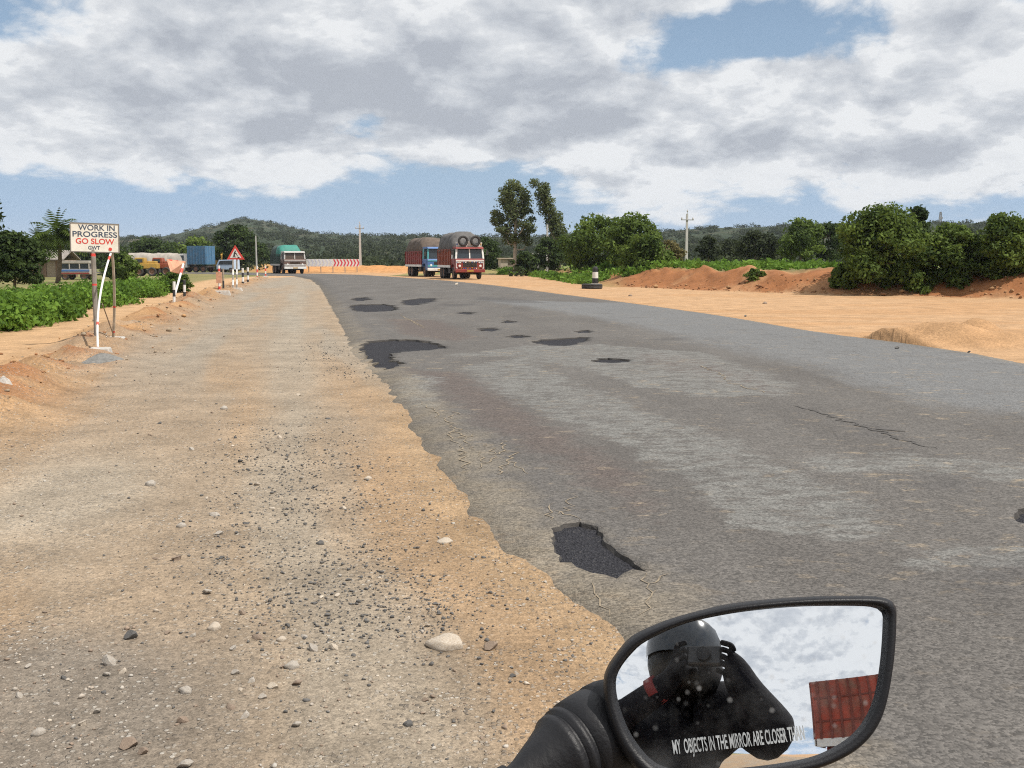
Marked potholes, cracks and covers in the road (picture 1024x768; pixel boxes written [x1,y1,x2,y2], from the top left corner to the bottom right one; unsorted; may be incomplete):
crack [590,583,610,615]
crack [421,403,528,475]
pothole [1014,509,1024,523]
pothole [348,304,398,312]
crack [640,573,668,614]
pothole [359,339,446,370]
crack [544,494,579,518]
pothole [532,337,589,346]
pothole [551,522,643,579]
crack [788,404,937,448]
